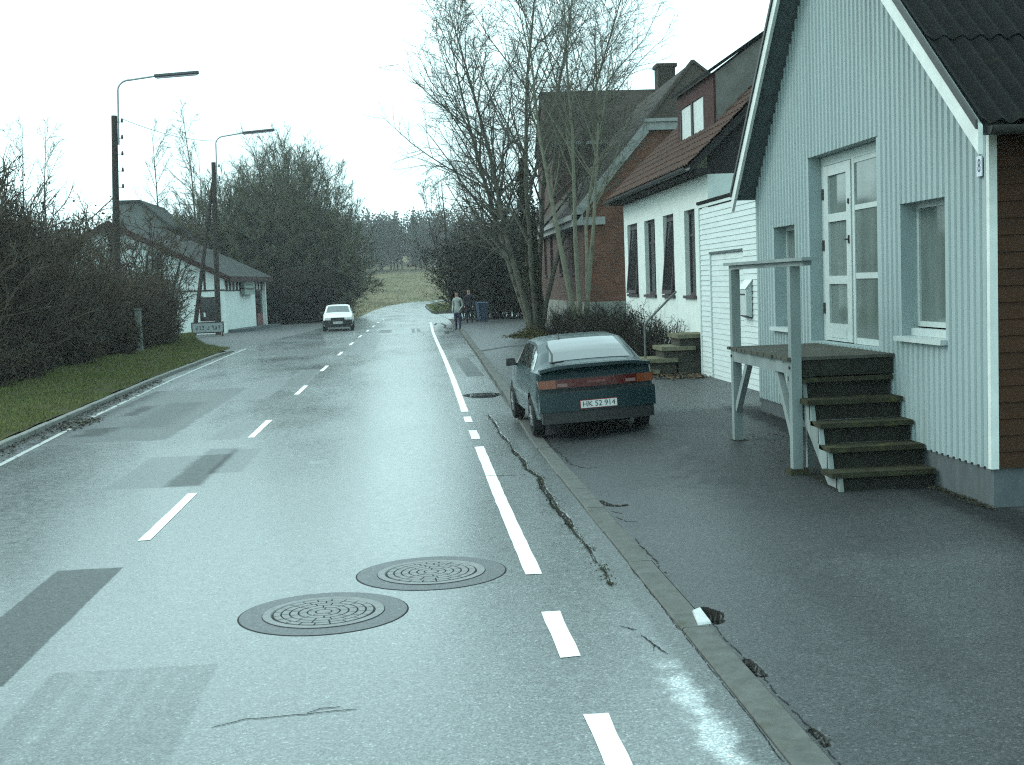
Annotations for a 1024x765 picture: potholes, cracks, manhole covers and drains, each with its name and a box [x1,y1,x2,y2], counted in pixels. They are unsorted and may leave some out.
pothole [692,607,724,625]
manhole cover [237,592,409,636]
manhole cover [356,556,507,591]
crack [488,415,667,586]
pothole [742,659,768,677]
crack [211,706,352,728]
pothole [807,726,836,747]
